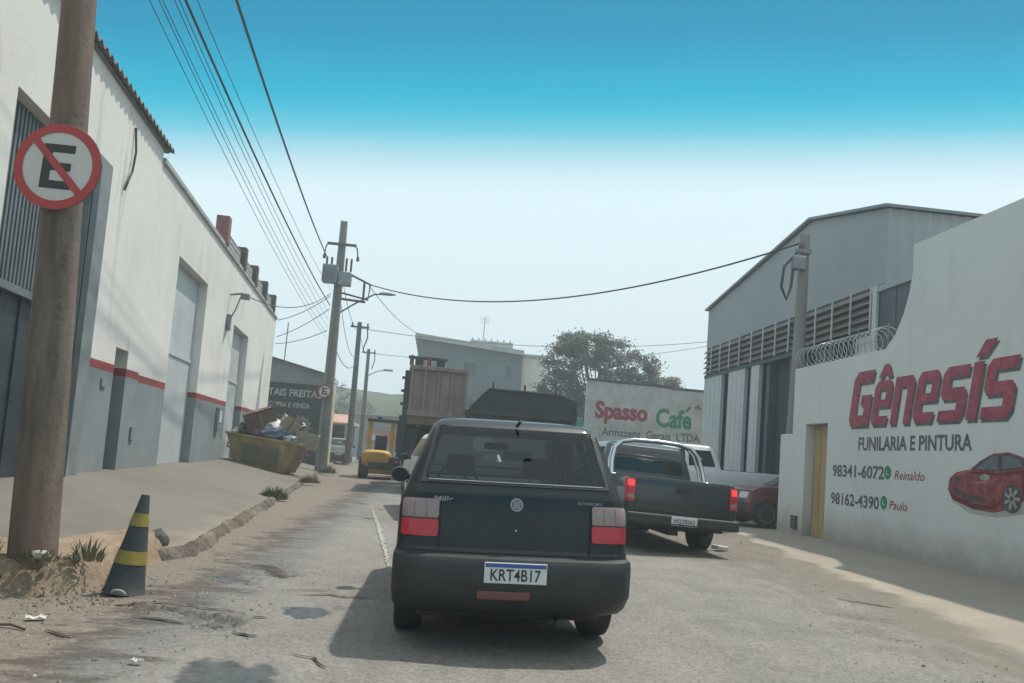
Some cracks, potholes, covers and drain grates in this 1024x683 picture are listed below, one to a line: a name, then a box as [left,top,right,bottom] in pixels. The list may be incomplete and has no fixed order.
pothole [108,602,253,633]
pothole [269,600,354,622]
crack [116,601,264,636]
